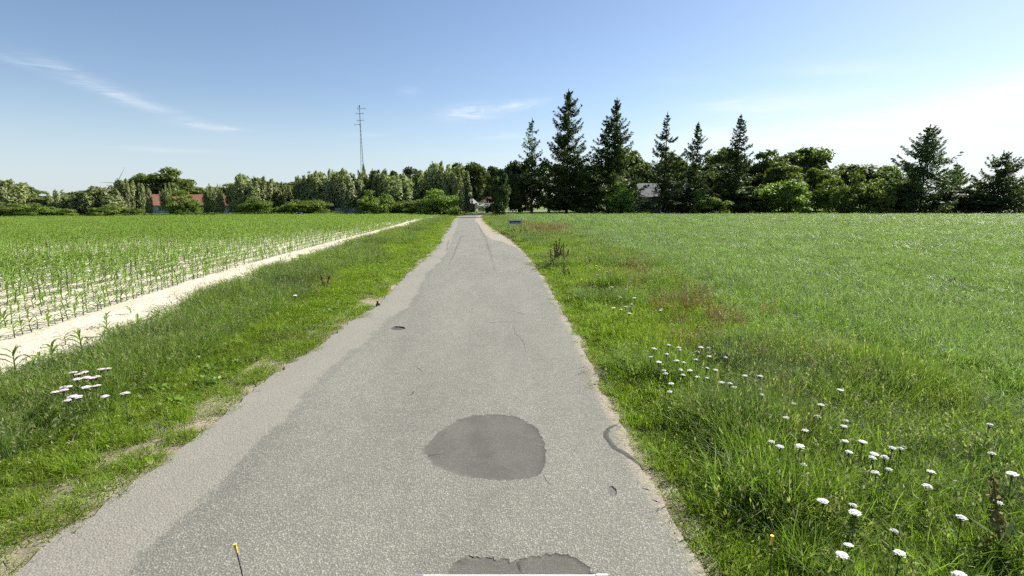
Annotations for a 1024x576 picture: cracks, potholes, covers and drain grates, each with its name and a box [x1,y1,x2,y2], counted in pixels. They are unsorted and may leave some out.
crack [448,222,495,271]
